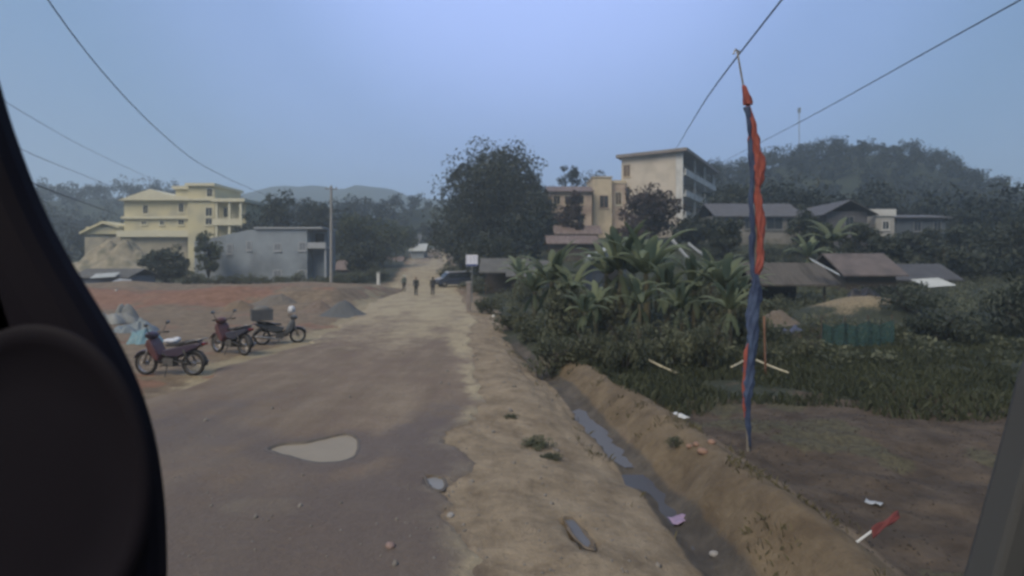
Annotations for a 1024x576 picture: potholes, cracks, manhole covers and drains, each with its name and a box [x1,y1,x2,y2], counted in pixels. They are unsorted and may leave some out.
pothole [264,433,361,464]
